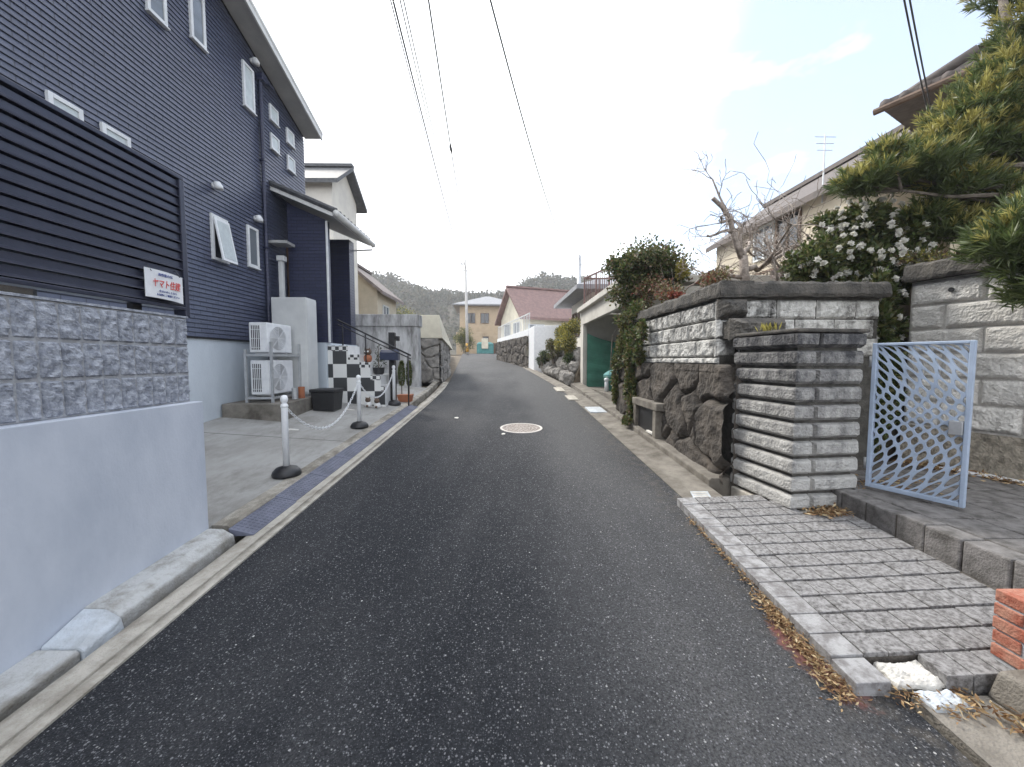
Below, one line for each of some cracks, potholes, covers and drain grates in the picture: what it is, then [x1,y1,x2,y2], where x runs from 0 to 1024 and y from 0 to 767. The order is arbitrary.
manhole cover [500,423,542,433]
